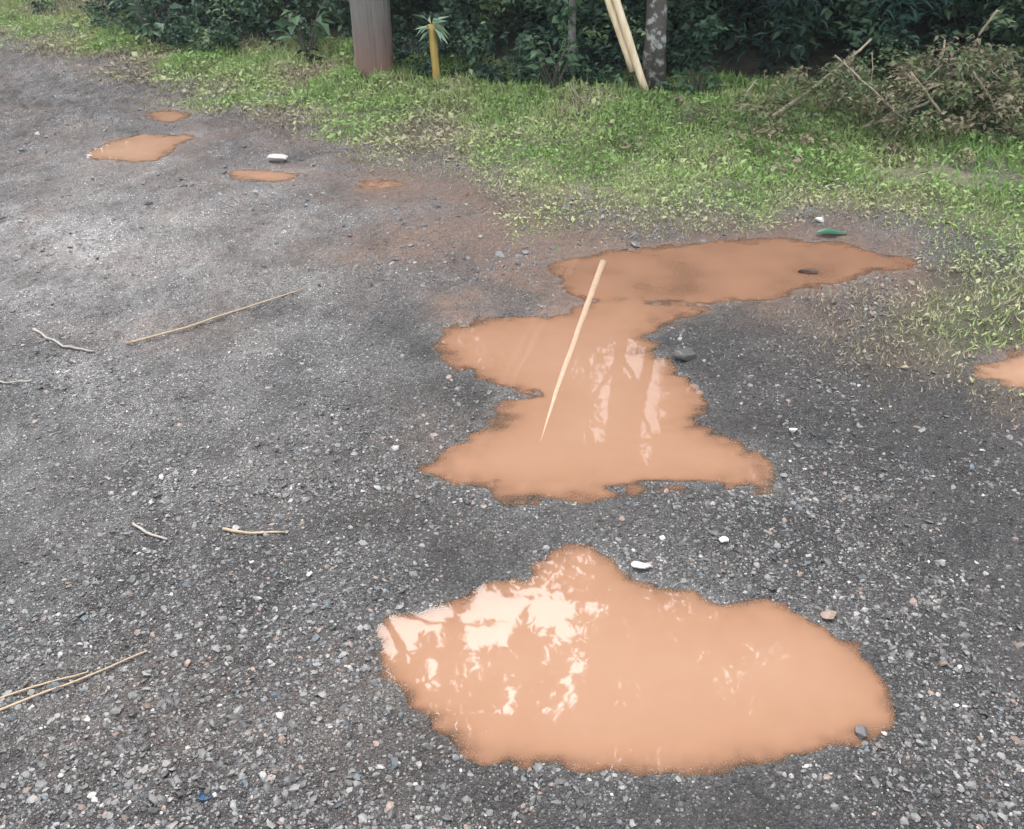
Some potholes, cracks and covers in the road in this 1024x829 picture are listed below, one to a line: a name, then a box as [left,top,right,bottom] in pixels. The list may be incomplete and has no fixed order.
pothole [962,344,1024,393]
pothole [76,129,205,165]
pothole [141,106,197,124]
pothole [402,232,925,520]
pothole [215,164,310,184]
pothole [355,533,913,799]
